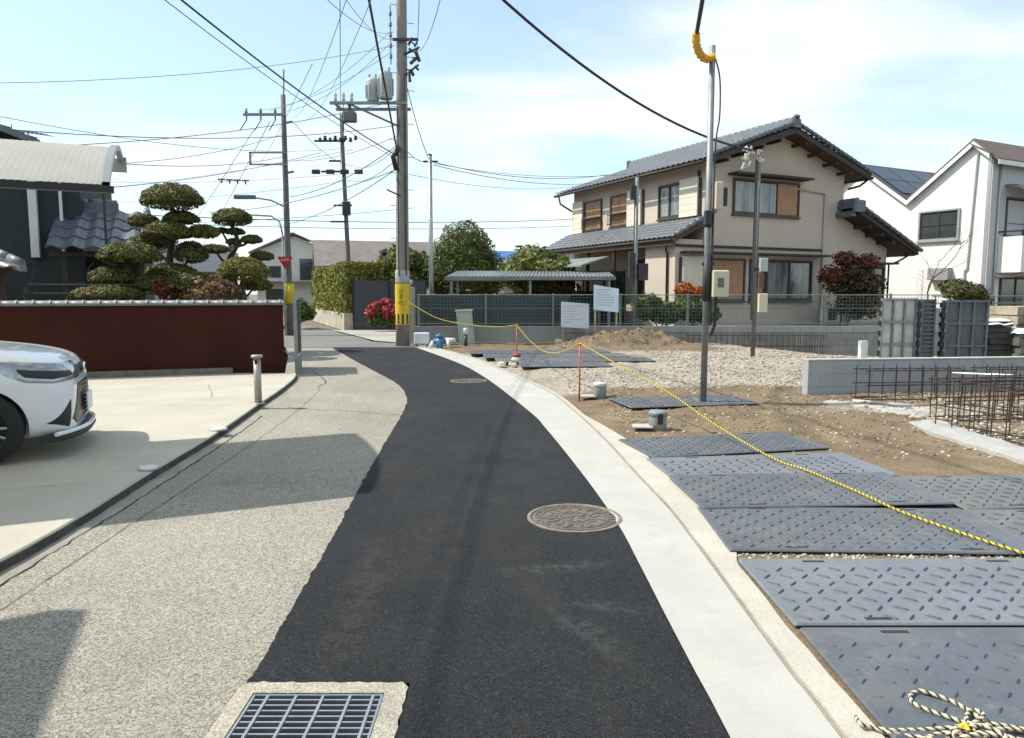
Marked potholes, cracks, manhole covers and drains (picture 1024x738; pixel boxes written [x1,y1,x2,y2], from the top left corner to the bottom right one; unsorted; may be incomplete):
manhole cover [527,504,622,533]
drain grate [205,681,408,738]
